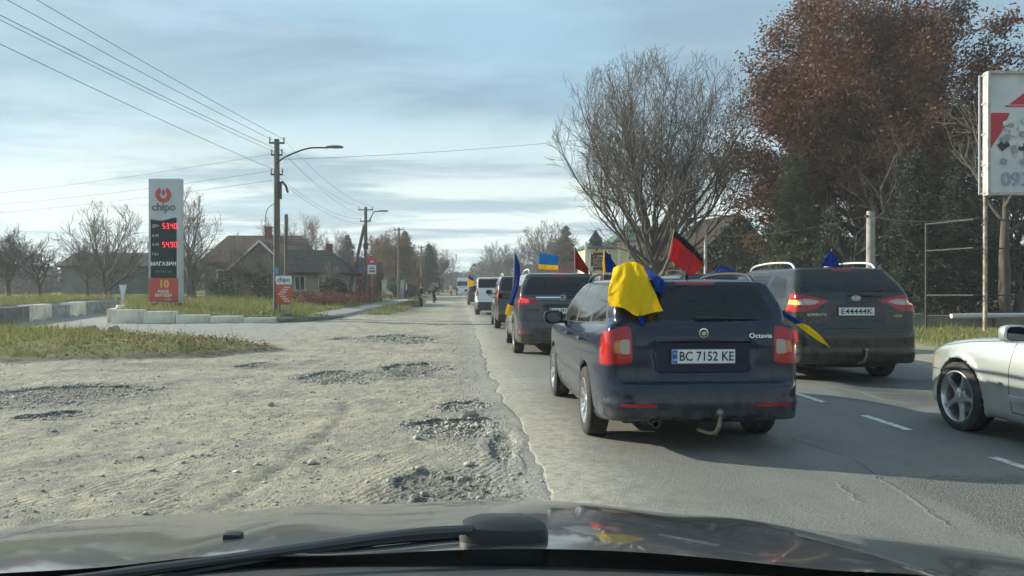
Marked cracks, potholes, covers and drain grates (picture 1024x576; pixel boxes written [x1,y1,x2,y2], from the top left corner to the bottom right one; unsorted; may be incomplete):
pothole [279,369,403,386]
pothole [377,466,525,503]
pothole [363,360,457,381]
pothole [348,333,446,346]
pothole [0,408,104,422]
pothole [394,415,513,440]
pothole [431,398,503,415]
pothole [218,360,279,373]
pothole [0,383,165,409]
